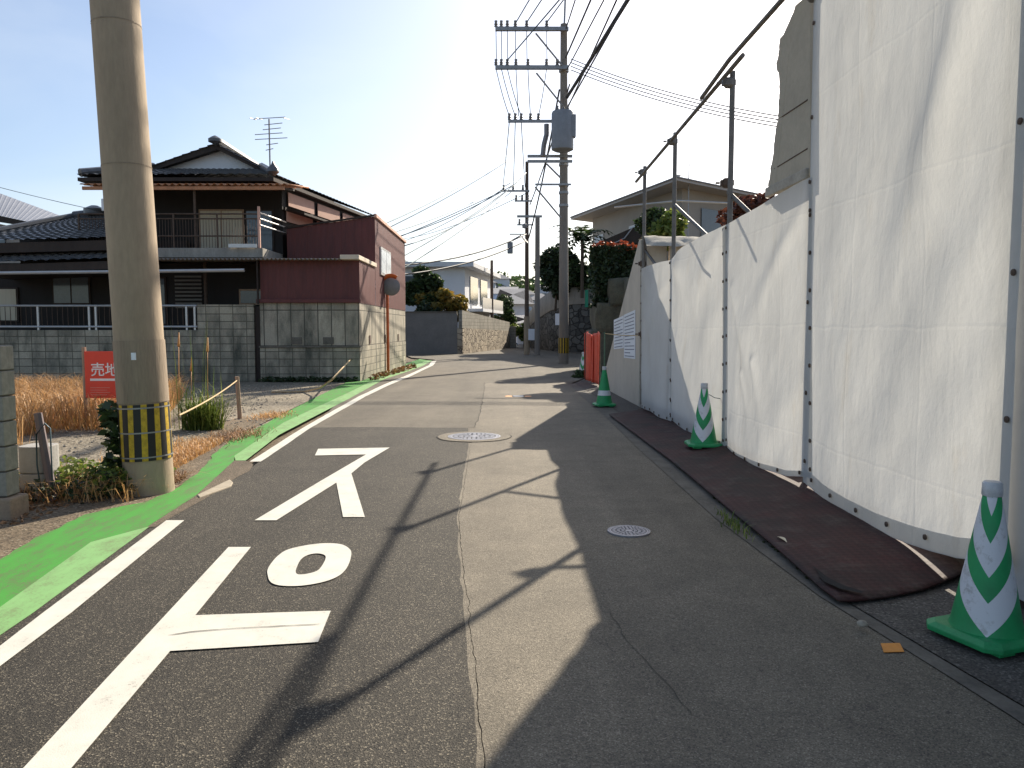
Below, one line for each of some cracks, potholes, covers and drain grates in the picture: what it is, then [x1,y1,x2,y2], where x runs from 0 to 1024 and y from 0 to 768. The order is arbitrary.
crack [609,609,691,712]
manhole cover [607,525,650,538]
manhole cover [436,431,512,442]
